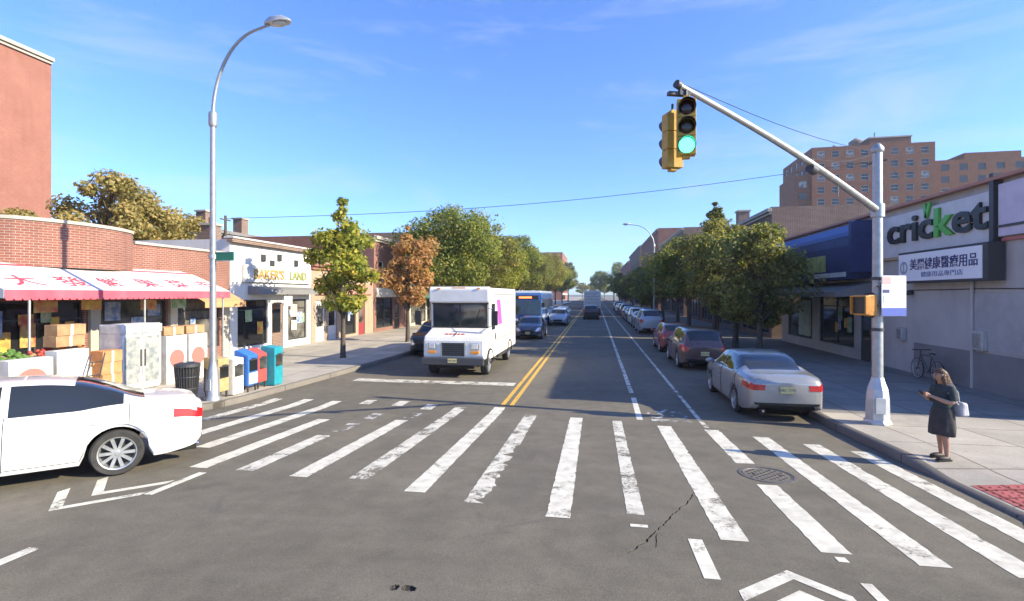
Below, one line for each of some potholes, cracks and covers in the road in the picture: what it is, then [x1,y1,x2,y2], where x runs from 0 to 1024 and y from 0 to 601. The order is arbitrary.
crack [622,493,694,555]
manhole cover [738,466,797,483]
